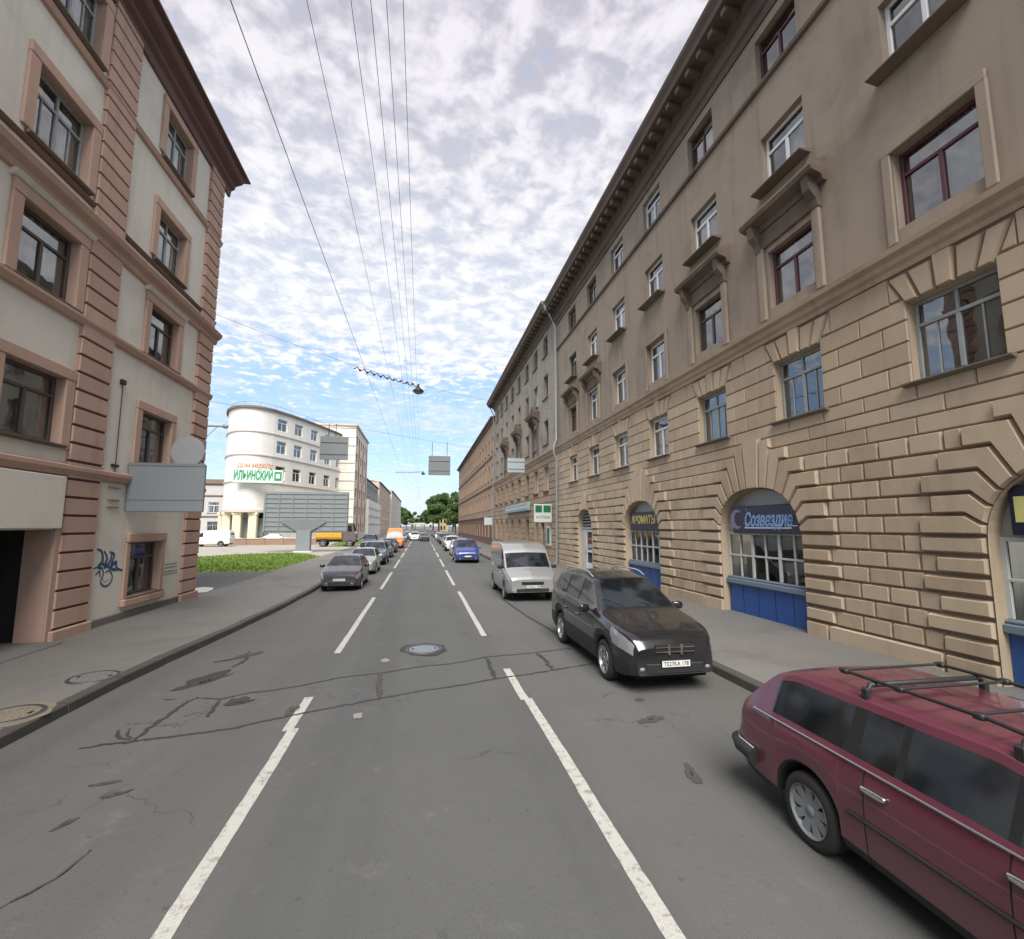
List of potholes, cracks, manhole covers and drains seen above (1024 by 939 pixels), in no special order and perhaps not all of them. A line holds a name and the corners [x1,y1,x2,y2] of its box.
manhole cover [400,643,447,656]
crack [114,728,132,740]
crack [206,699,221,717]
manhole cover [0,701,57,728]
manhole cover [64,670,121,684]
crack [0,849,91,908]
